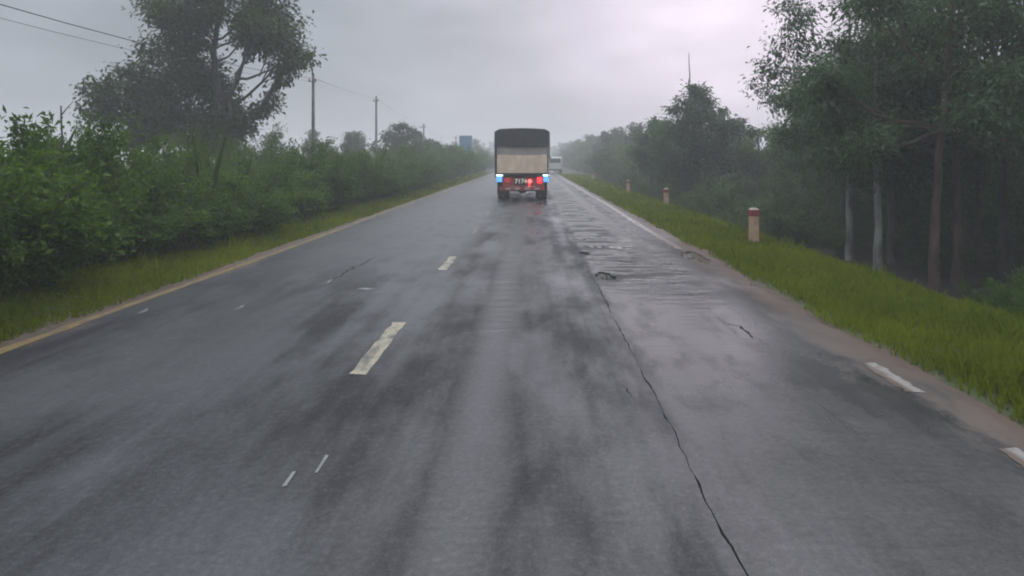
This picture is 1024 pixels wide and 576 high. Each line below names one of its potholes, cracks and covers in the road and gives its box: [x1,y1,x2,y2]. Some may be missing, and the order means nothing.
crack [587,271,749,576]
pothole [681,251,711,262]
pothole [595,271,617,280]
